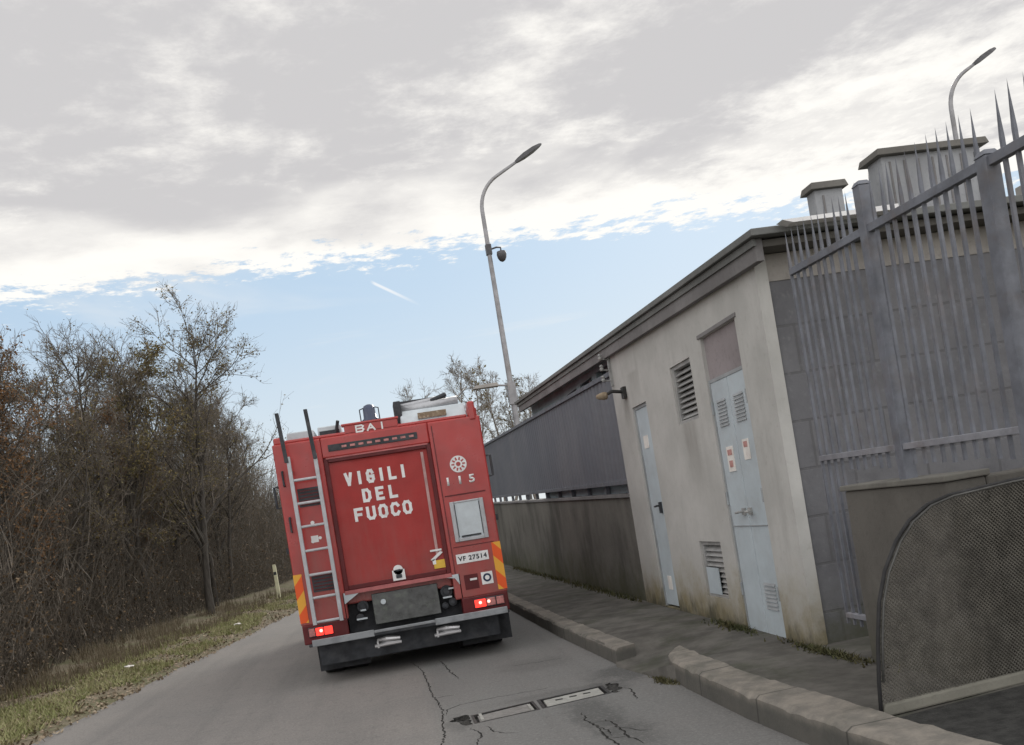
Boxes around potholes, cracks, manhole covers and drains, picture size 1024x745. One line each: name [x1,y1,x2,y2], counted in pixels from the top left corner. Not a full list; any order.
crack [411,661,457,745]
crack [581,713,650,745]
